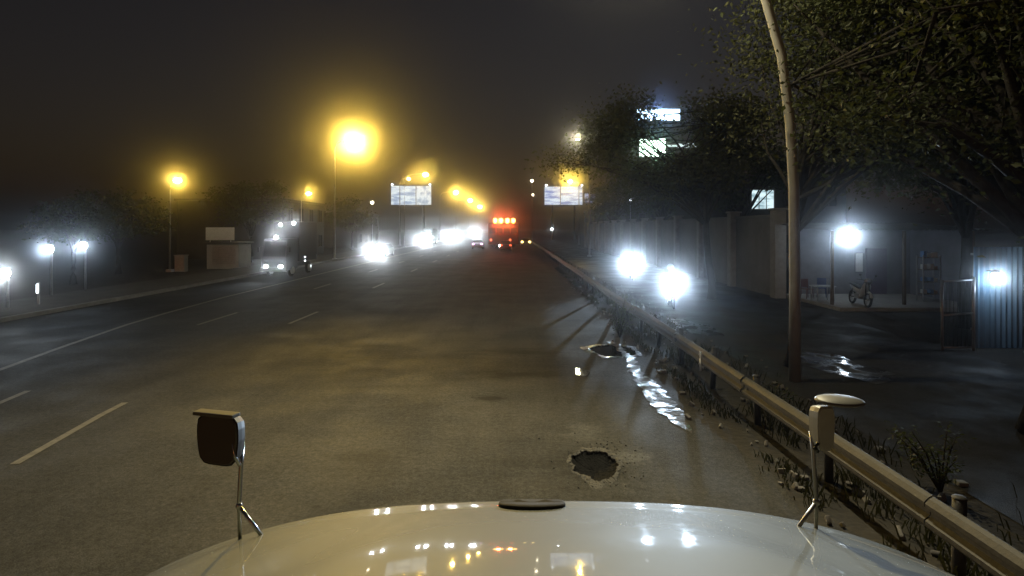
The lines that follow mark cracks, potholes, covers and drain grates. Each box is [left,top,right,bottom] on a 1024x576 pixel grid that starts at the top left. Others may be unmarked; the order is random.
pothole [580,343,642,358]
pothole [567,447,624,489]
